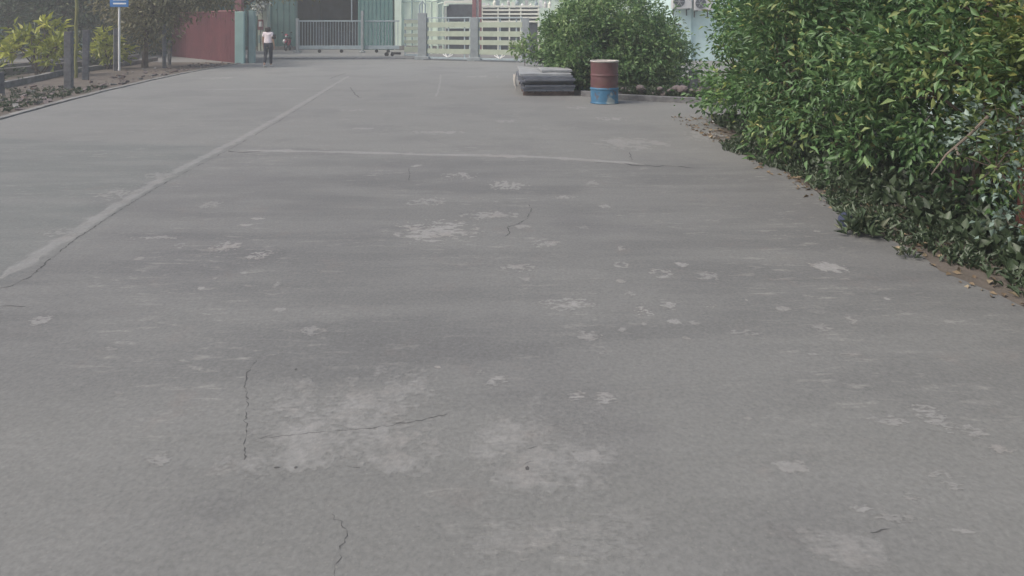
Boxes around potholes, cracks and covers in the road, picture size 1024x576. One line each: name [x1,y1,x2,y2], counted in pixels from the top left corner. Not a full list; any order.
crack [243,361,257,460]
crack [260,413,448,439]
